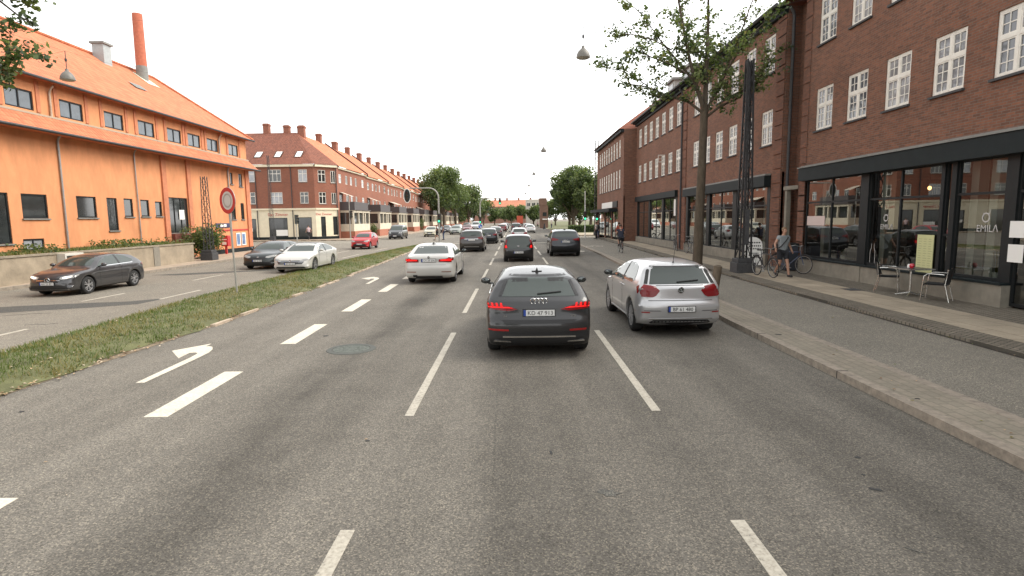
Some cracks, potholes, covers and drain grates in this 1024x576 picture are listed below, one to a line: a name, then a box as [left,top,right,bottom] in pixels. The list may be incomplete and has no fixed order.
manhole cover [326,344,376,355]
